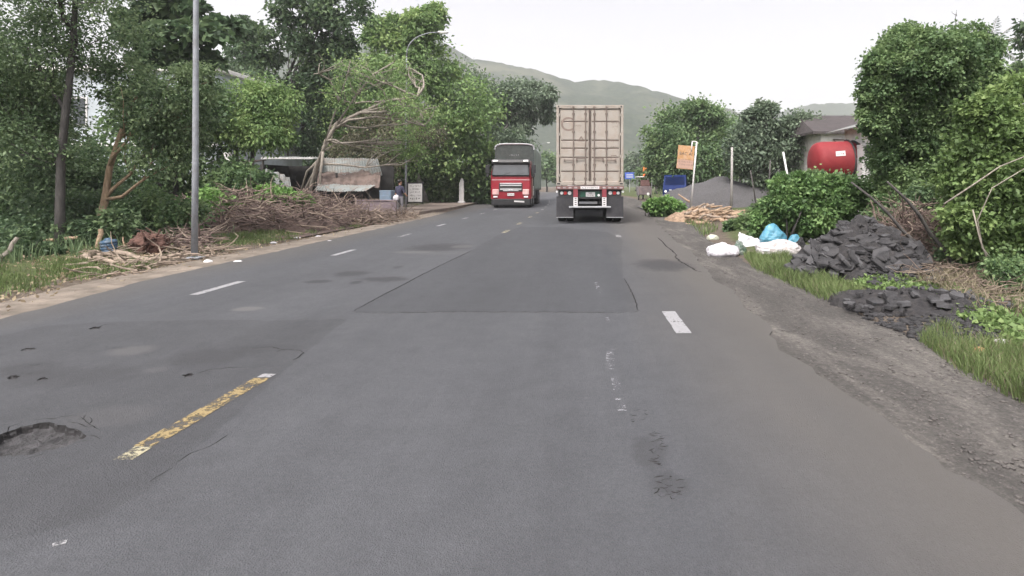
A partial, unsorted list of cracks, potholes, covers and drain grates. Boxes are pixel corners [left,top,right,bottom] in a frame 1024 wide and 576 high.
pothole [0,422,86,457]
crack [6,414,100,460]
crack [631,409,683,499]
